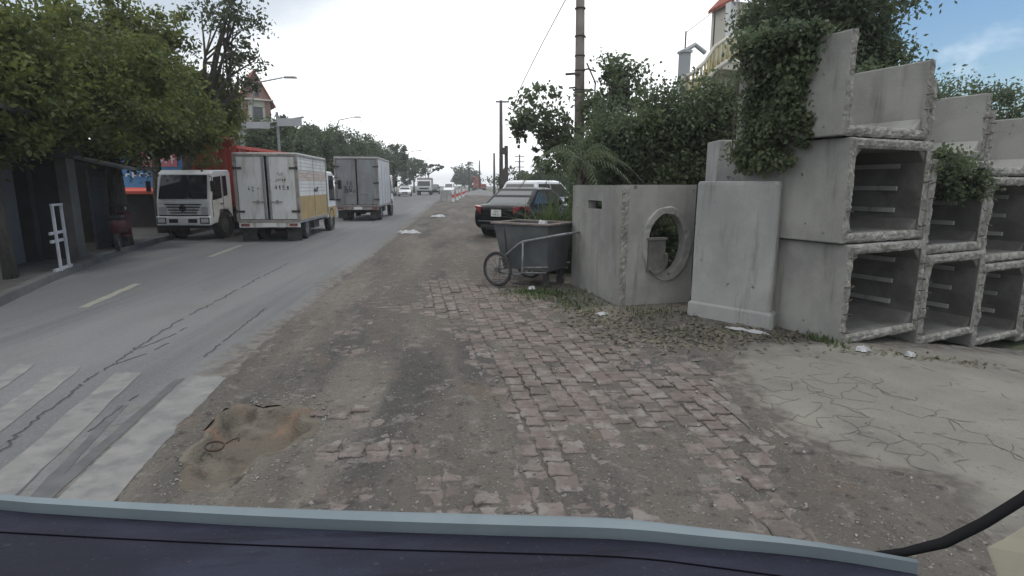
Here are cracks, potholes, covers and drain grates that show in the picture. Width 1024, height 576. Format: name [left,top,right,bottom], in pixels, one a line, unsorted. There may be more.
crack [744,351,1024,472]
pothole [176,404,322,493]
crack [0,263,289,451]
